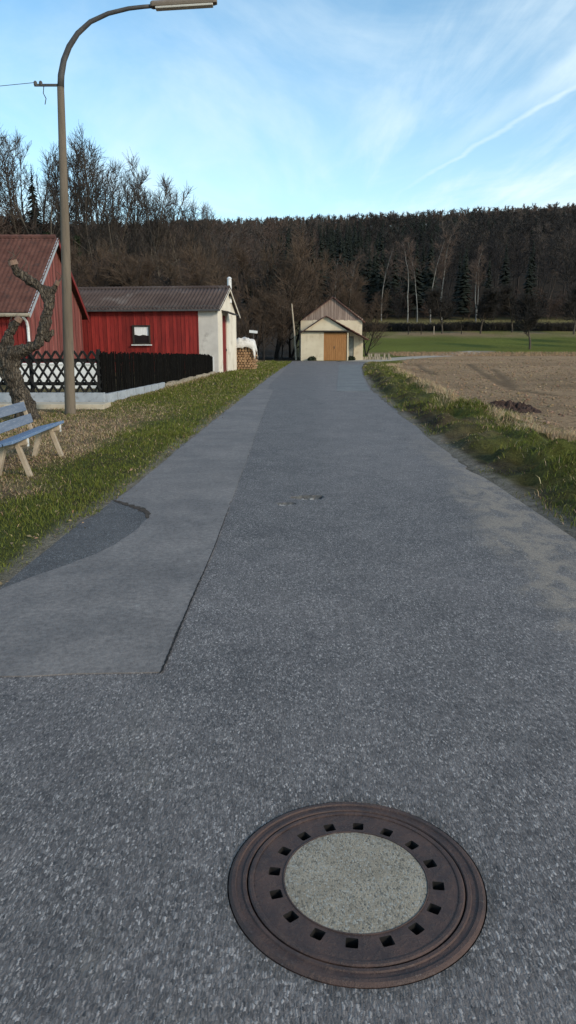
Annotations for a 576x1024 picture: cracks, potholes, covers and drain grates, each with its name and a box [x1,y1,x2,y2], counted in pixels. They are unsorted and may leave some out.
manhole cover [228,802,486,989]
